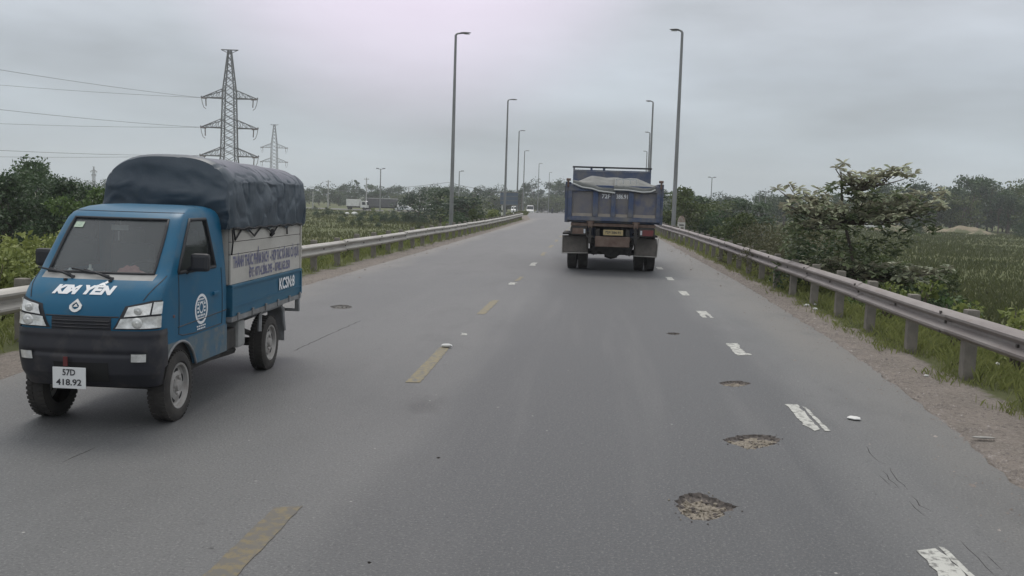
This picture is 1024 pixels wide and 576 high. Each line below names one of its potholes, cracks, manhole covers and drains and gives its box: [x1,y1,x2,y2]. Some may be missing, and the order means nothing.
crack [867,447,929,514]
pothole [668,492,743,525]
pothole [723,434,783,450]
